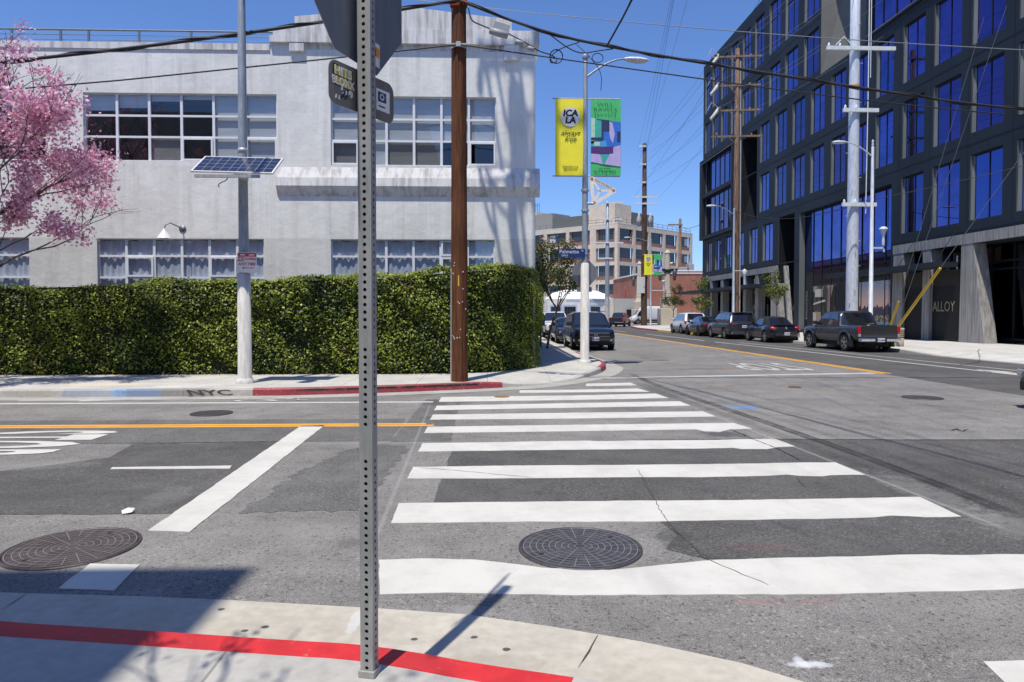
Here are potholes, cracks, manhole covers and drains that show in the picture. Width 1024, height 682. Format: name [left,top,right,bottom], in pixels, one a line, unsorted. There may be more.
manhole cover [0,527,142,571]
crack [637,469,762,582]
manhole cover [518,527,643,570]
